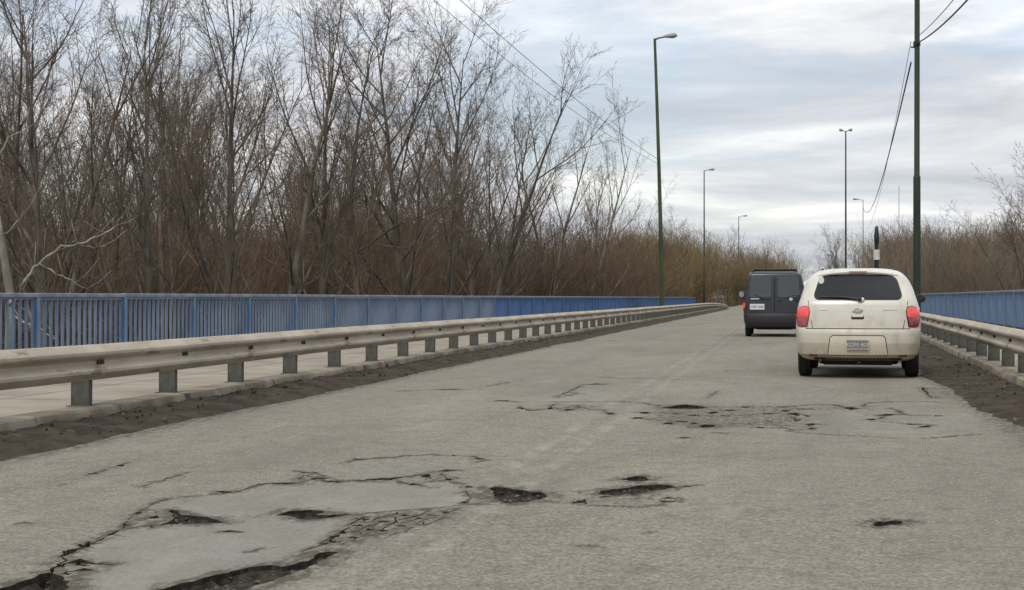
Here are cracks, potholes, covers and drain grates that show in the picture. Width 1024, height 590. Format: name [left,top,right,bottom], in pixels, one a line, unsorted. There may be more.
pothole [278,510,348,520]
crack [50,454,488,580]
pothole [490,487,547,503]
pothole [161,510,226,525]
pothole [0,573,69,590]
pothole [573,485,697,507]
crack [632,393,973,439]
pothole [158,552,338,590]
crack [491,378,650,414]
